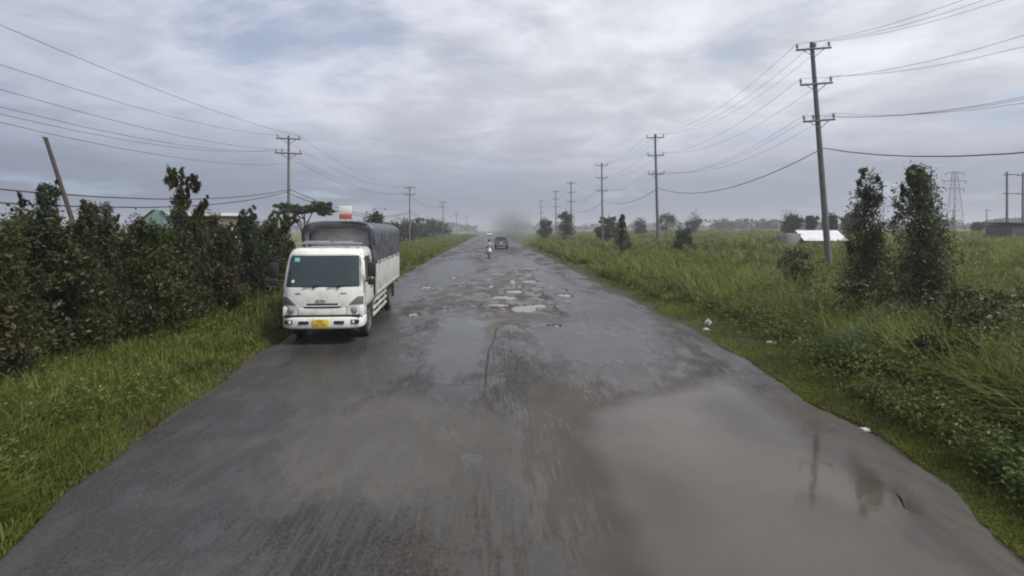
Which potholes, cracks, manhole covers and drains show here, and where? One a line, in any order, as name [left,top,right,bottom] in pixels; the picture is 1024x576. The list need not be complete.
pothole [509,303,549,312]
crack [357,328,497,387]
